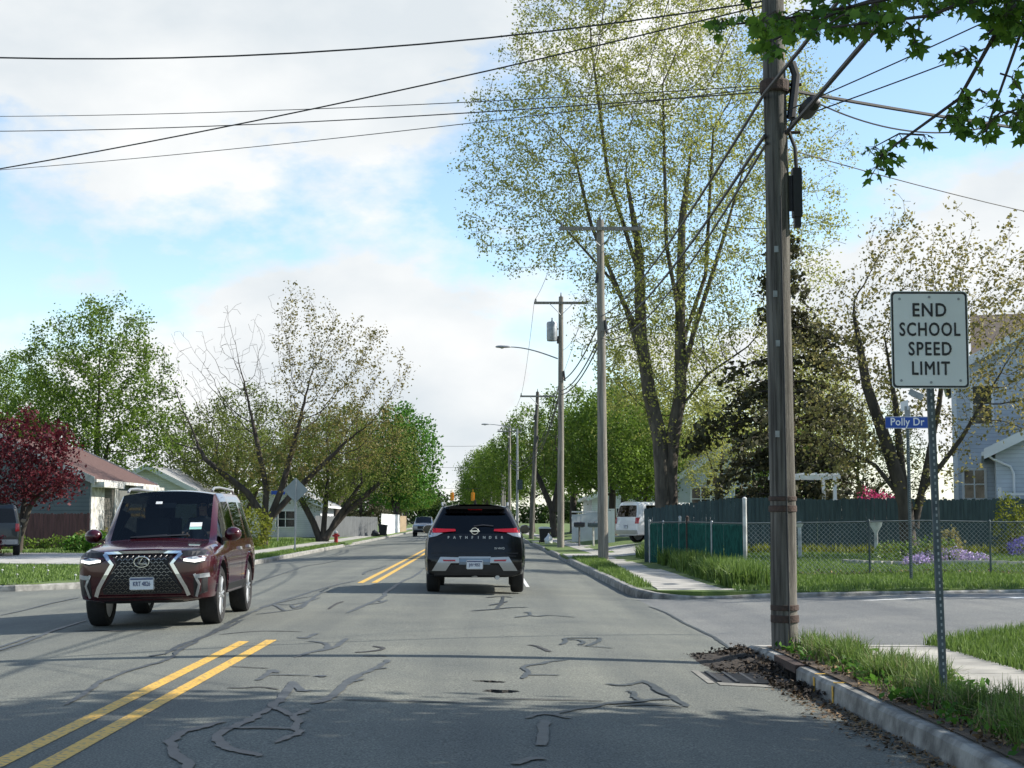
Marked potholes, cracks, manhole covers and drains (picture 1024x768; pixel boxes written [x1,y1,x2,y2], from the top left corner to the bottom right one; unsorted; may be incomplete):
drain grate [691,655,808,687]
crack [2,597,79,615]
